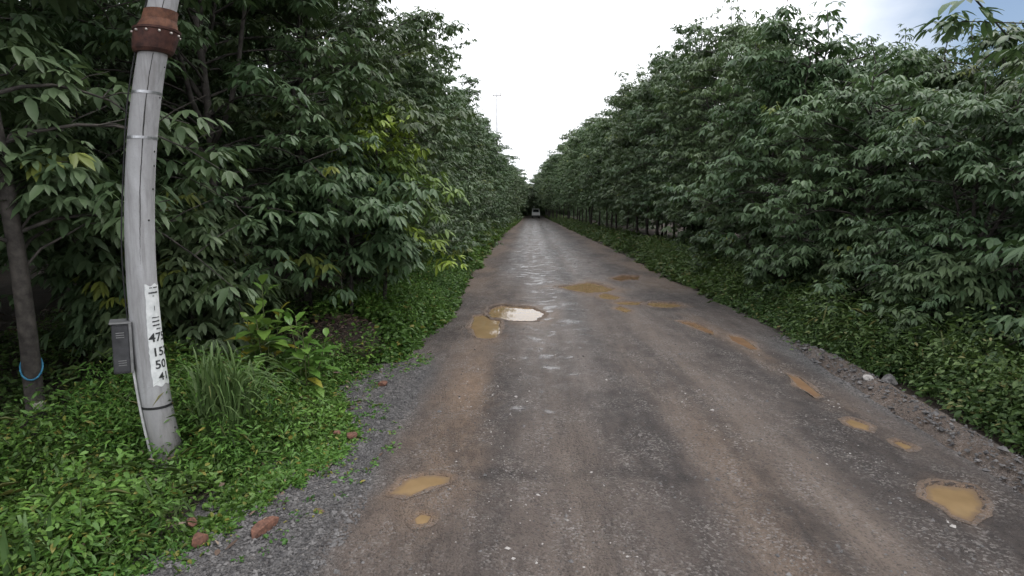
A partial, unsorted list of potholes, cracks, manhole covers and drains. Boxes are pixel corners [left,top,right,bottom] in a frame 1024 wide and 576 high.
pothole [886,437,922,452]
pothole [915,478,995,526]
pothole [610,305,636,314]
pothole [674,320,718,336]
pothole [593,292,626,301]
pothole [838,416,877,433]
pothole [482,303,549,322]
pothole [726,334,761,351]
pothole [552,281,620,294]
pothole [786,372,825,399]
pothole [381,471,458,500]
pothole [405,508,440,529]
